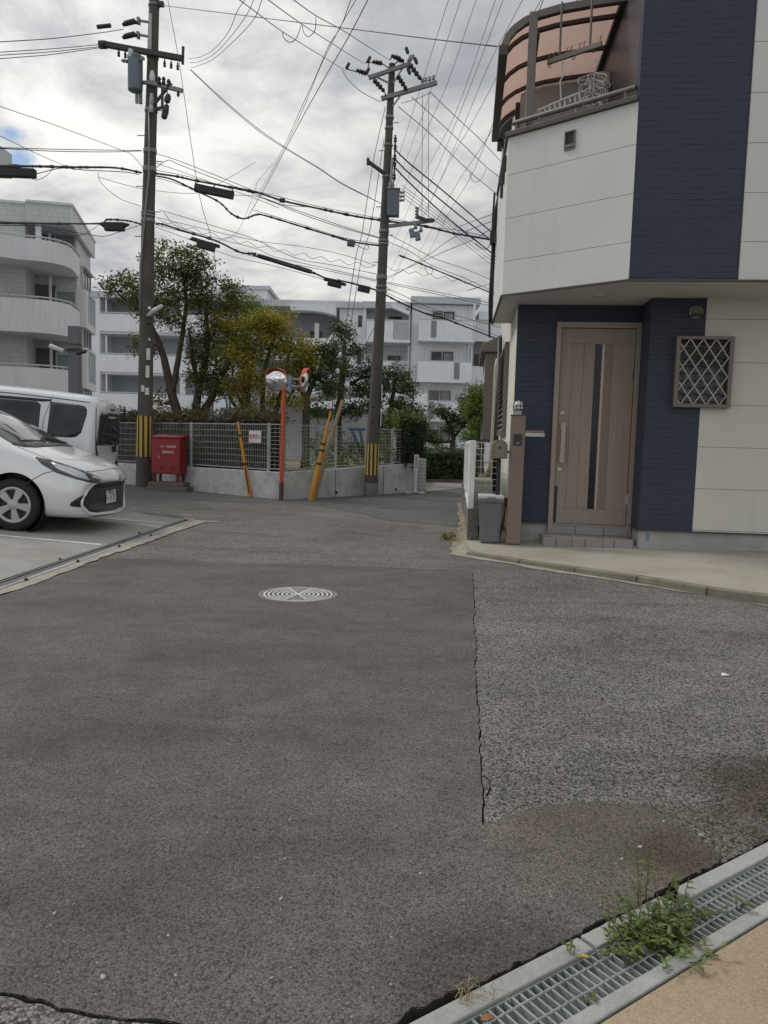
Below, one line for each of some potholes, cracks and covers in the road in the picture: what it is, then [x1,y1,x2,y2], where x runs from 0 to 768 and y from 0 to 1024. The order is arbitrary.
manhole cover [258,586,337,603]
crack [472,574,491,825]
